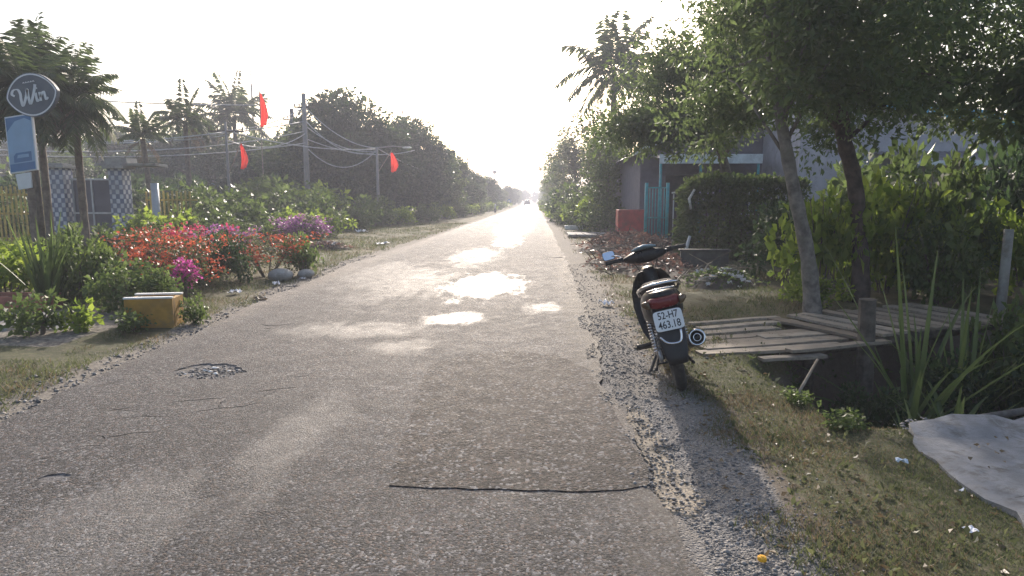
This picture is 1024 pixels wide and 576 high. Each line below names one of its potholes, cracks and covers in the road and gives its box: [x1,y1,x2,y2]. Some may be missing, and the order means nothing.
crack [85,375,310,446]
pothole [169,363,247,380]
